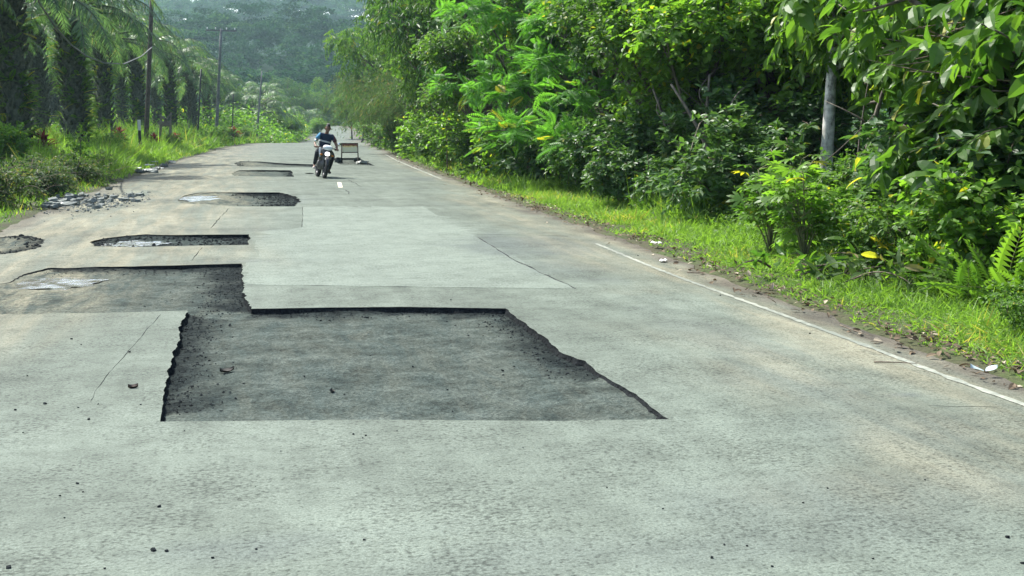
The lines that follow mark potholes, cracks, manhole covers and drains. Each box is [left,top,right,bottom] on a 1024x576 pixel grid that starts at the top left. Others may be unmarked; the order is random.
pothole [0,234,44,254]
pothole [0,264,252,315]
pothole [178,192,301,206]
pothole [92,234,250,247]
crack [90,314,161,402]
pothole [160,307,668,422]
